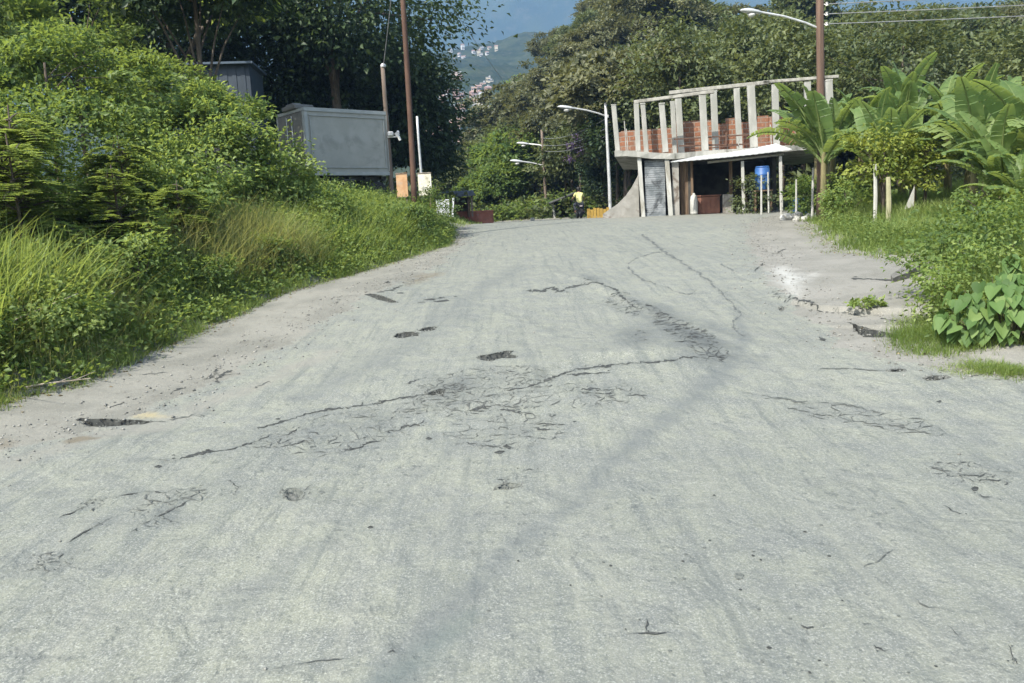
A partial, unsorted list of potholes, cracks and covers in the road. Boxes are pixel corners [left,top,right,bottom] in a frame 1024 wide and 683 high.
pothole [76,417,154,428]
crack [22,484,212,572]
crack [926,458,1009,514]
crack [148,251,729,462]
pothole [365,293,397,303]
pothole [848,322,891,338]
pothole [476,351,517,362]
pothole [394,331,421,339]
crack [751,393,943,435]
pothole [278,487,311,501]
